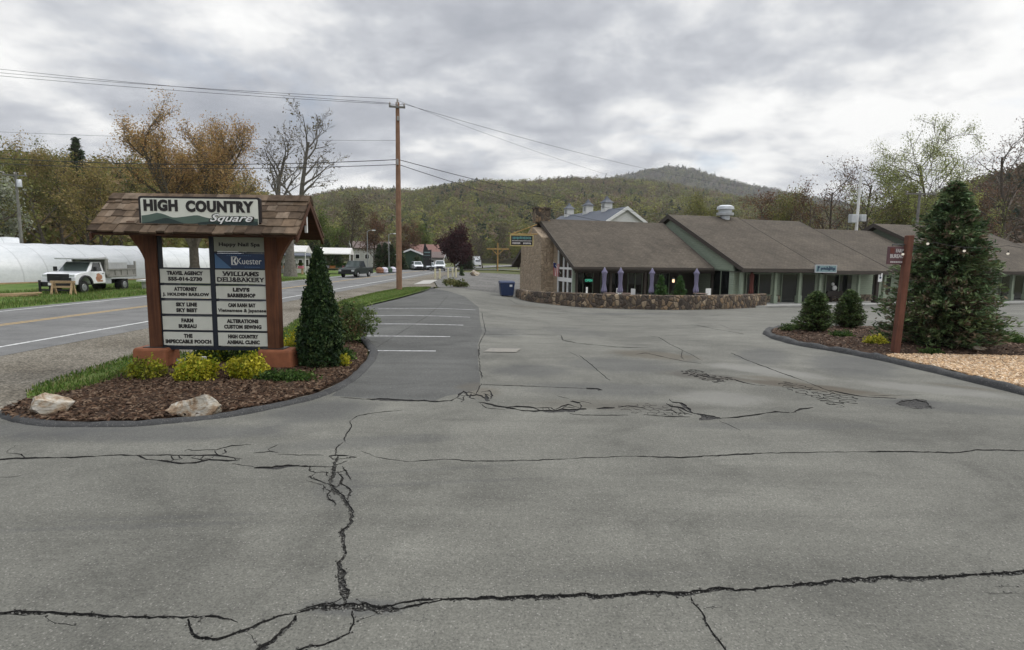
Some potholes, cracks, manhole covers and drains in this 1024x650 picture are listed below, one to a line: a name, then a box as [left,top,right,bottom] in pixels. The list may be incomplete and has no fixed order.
pothole [896,399,932,409]
crack [0,410,1024,650]
crack [449,316,928,431]
